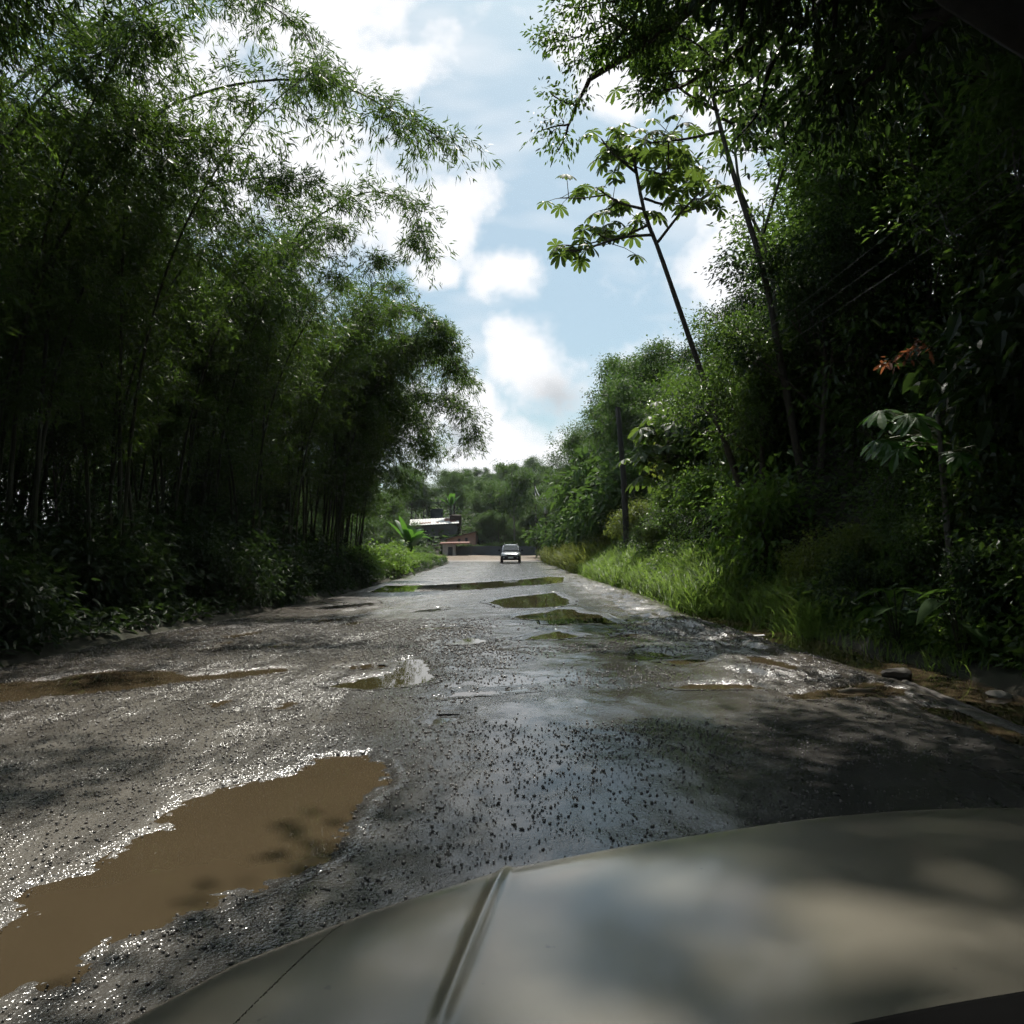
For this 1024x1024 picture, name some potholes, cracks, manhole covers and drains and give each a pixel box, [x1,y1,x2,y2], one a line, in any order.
pothole [190,693,252,710]
pothole [730,652,810,671]
pothole [505,608,627,625]
pothole [0,665,303,704]
pothole [658,679,782,691]
pothole [359,576,571,593]
pothole [481,592,578,608]
pothole [0,746,411,1014]
pothole [512,629,590,641]
pothole [317,655,447,692]
